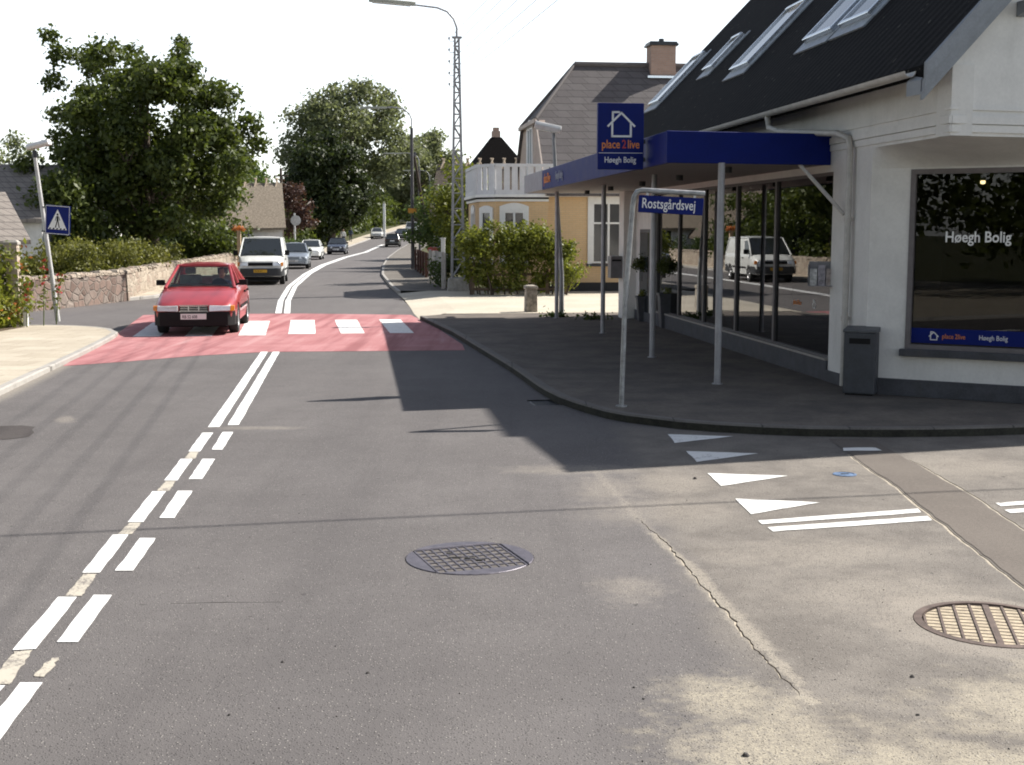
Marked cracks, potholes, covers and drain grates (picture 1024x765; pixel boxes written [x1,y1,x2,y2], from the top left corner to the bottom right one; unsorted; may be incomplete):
crack [642,521,800,695]
